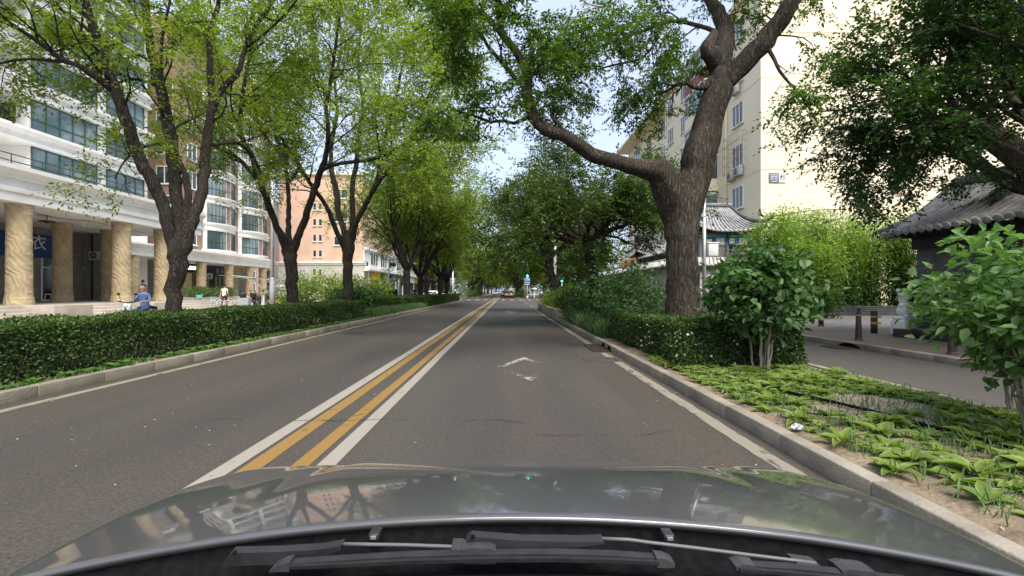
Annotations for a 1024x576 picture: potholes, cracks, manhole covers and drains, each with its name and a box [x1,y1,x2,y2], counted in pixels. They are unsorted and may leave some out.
crack [294,409,672,436]
drain grate [583,344,611,352]
